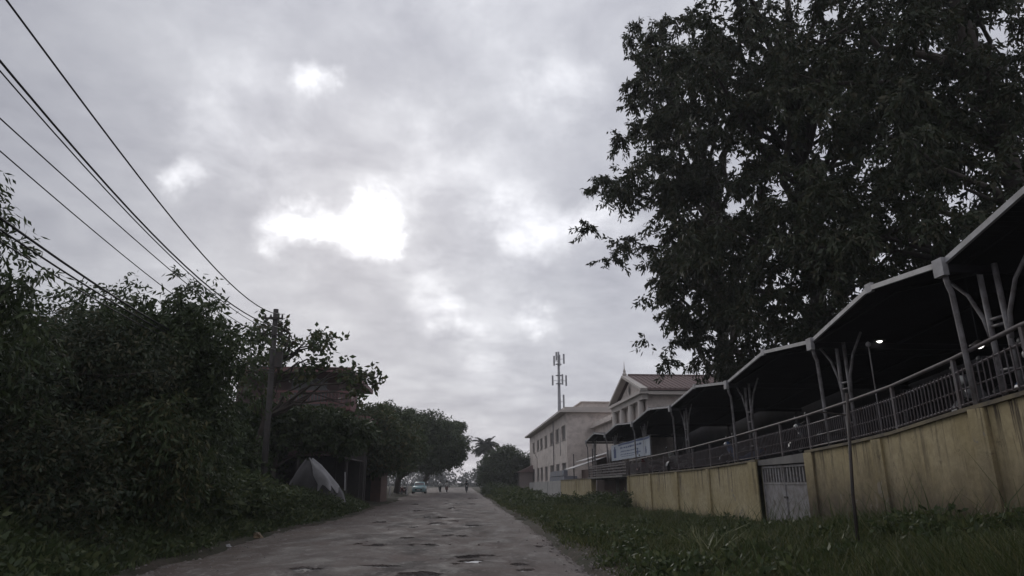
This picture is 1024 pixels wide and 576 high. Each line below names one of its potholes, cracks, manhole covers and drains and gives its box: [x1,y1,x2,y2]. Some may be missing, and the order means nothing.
pothole [279,566,334,574]
